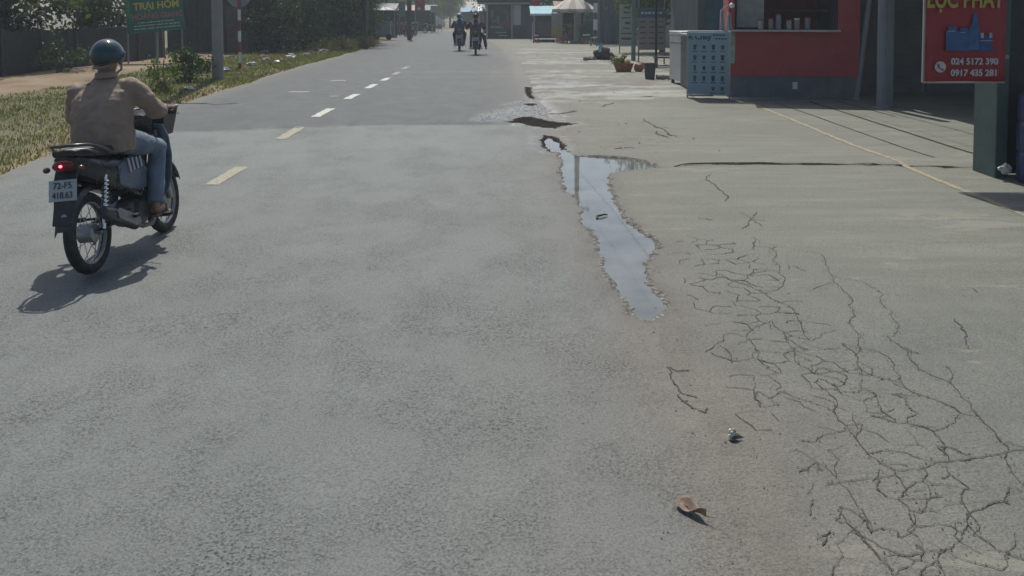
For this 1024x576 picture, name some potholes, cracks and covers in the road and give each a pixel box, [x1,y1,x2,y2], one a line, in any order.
crack [675,162,955,228]
crack [668,366,708,413]
pothole [539,135,567,153]
crack [676,237,1024,576]
pothole [506,117,577,129]
pothole [556,149,672,322]
